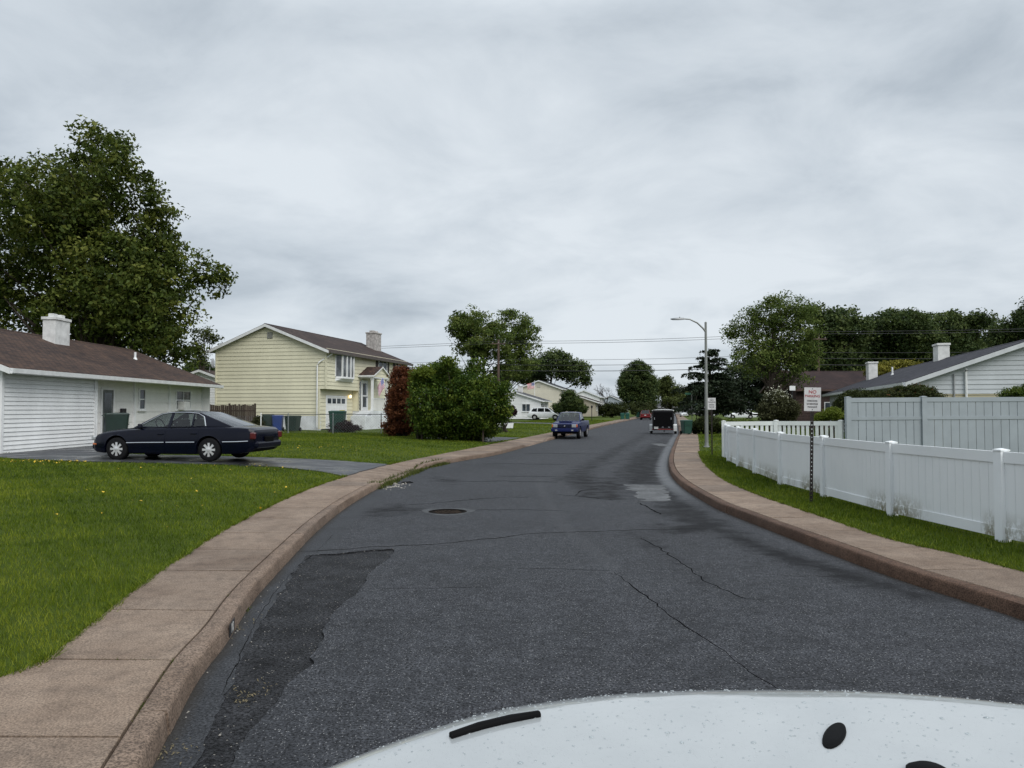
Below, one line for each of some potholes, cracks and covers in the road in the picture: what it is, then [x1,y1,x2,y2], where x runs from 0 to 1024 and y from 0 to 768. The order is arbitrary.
manhole cover [422,508,475,516]
crack [319,503,834,690]
